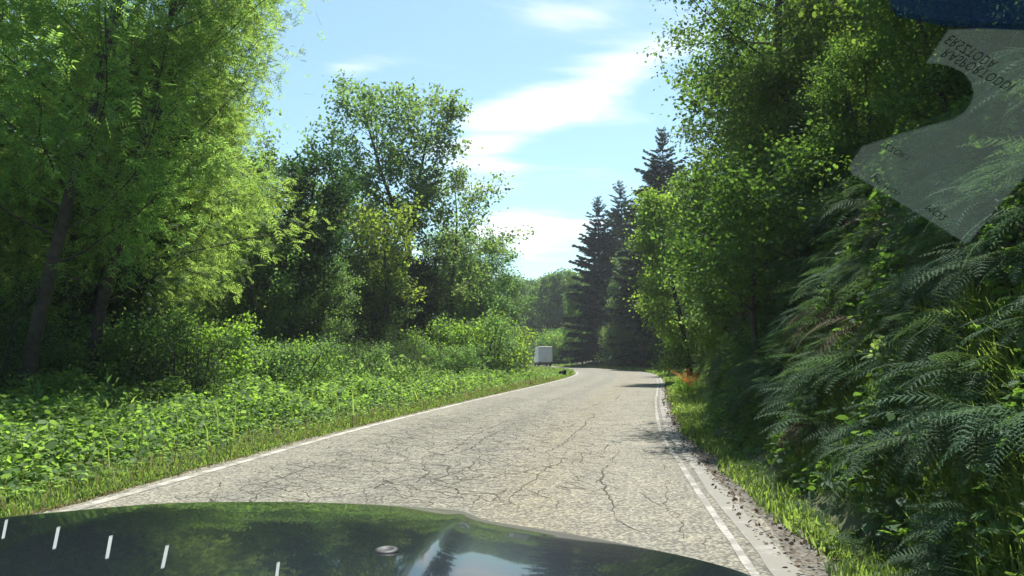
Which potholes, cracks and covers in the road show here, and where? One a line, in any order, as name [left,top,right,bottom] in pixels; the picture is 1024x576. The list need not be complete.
crack [175,394,649,534]
